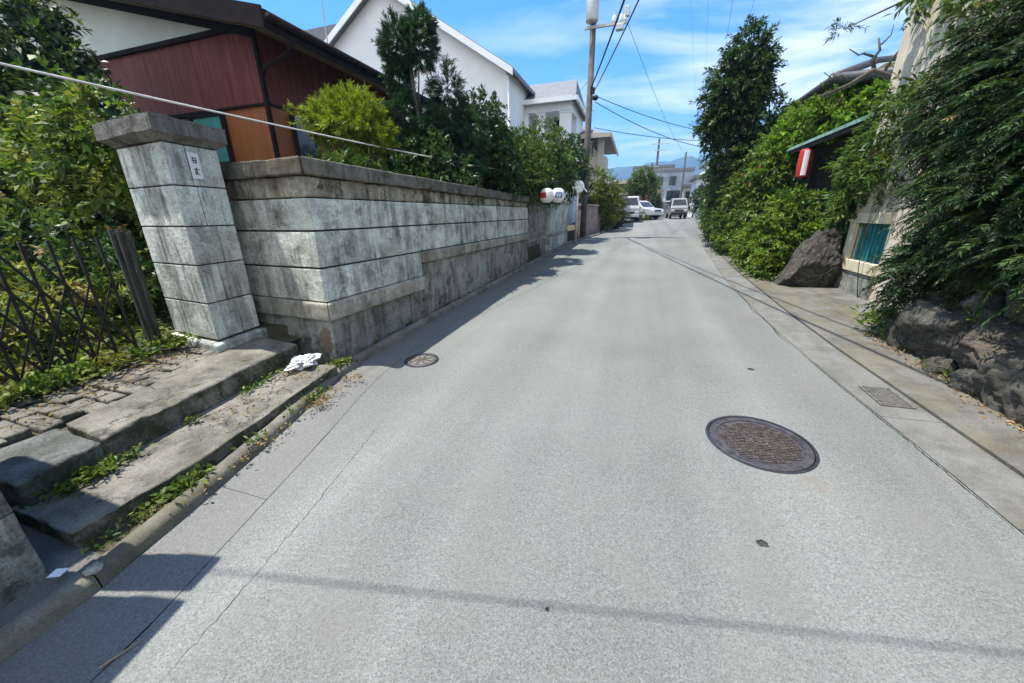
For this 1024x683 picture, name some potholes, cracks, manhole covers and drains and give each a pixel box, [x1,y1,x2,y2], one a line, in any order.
manhole cover [705,415,820,474]
manhole cover [404,353,439,367]
